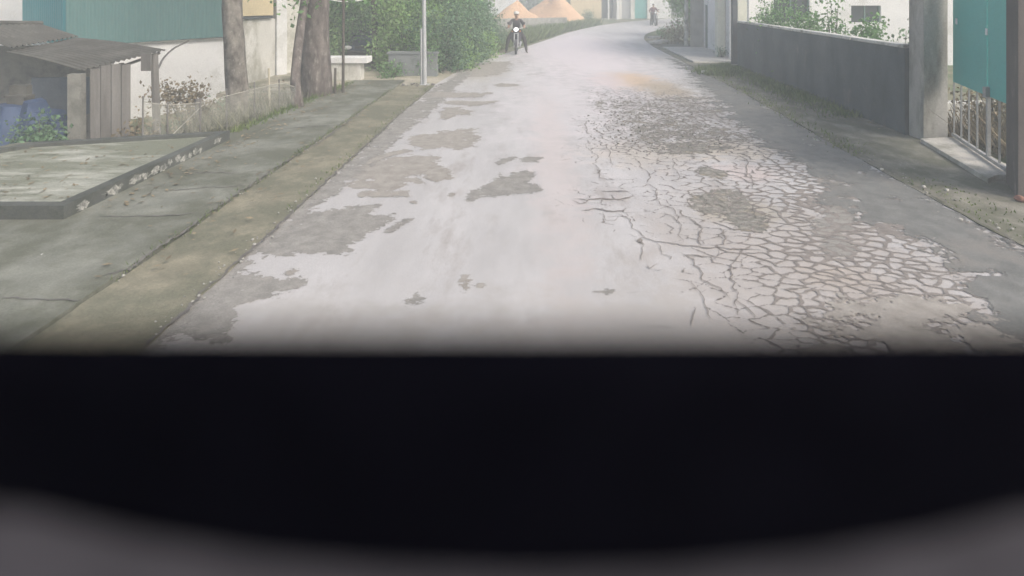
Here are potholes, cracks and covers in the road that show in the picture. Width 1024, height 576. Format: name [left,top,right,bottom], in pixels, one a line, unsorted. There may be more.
crack [555,78,1024,330]
